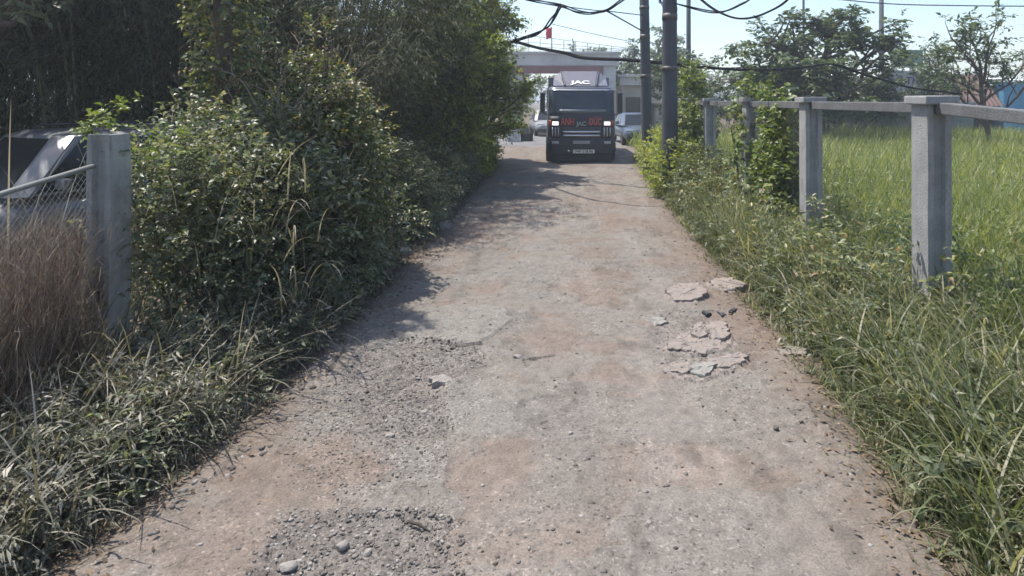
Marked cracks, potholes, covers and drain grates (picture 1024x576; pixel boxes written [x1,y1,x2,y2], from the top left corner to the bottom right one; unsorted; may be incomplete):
pothole [646,305,752,384]
crack [428,337,480,348]
pothole [338,336,488,436]
